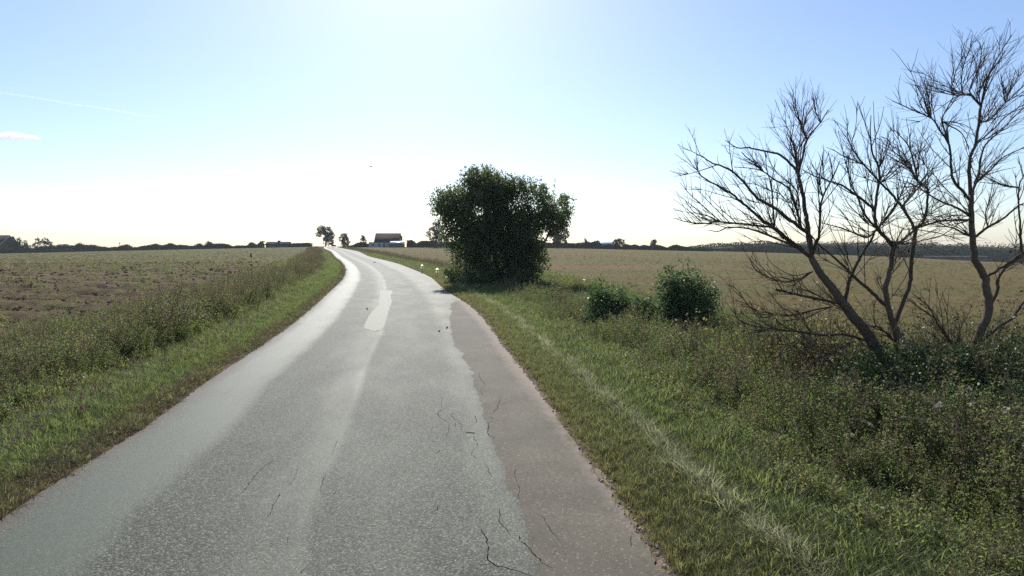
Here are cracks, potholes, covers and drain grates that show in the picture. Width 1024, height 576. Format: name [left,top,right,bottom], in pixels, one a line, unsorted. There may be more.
crack [437,373,501,478]
crack [479,510,560,576]
